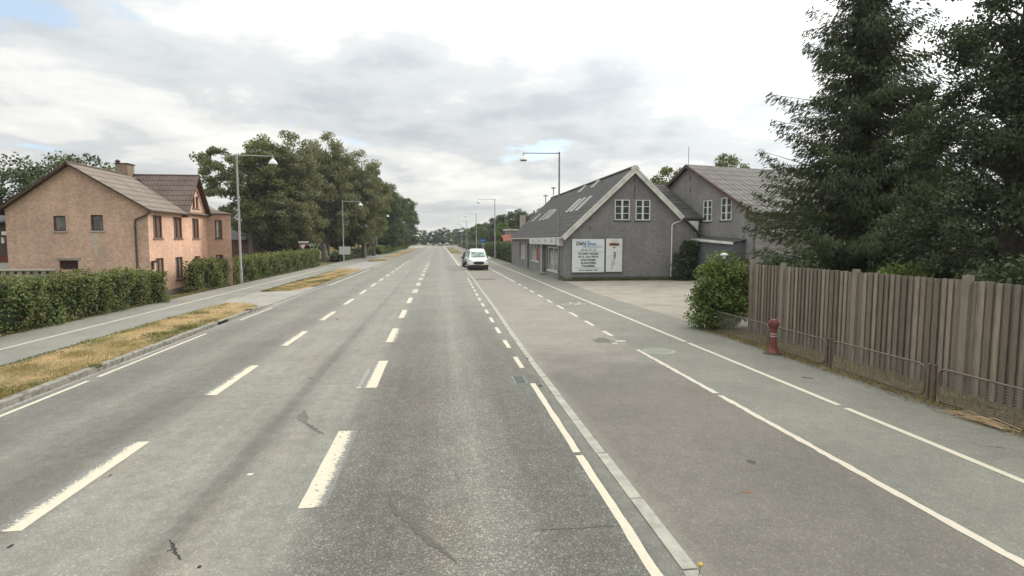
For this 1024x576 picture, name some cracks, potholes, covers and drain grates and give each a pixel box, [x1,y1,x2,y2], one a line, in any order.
crack [167,539,181,560]
crack [388,494,456,562]
